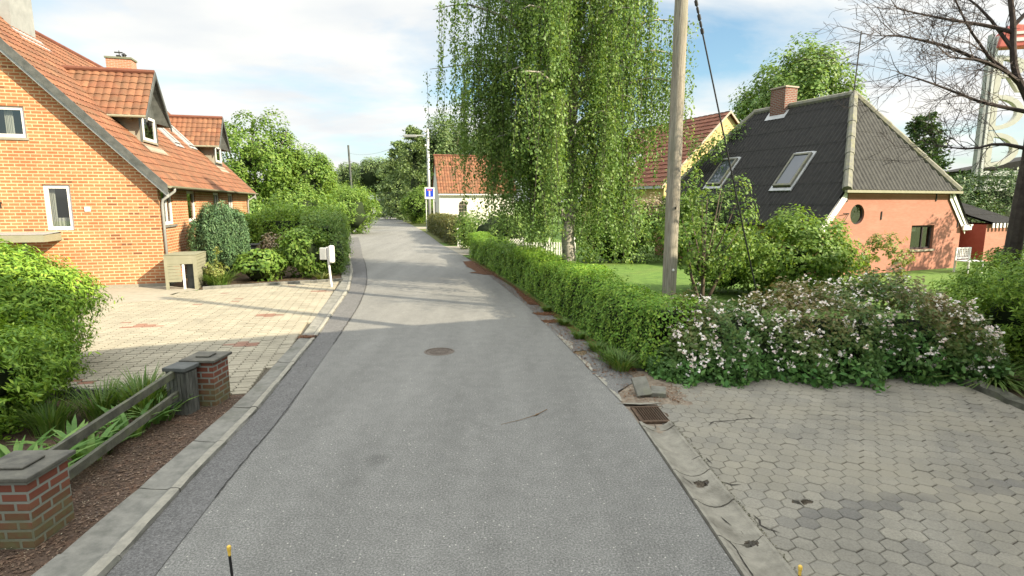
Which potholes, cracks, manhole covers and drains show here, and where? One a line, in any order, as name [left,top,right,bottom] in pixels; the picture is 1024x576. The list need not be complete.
crack [720,515,779,576]
manhole cover [424,347,455,356]
drain grate [630,406,670,424]
